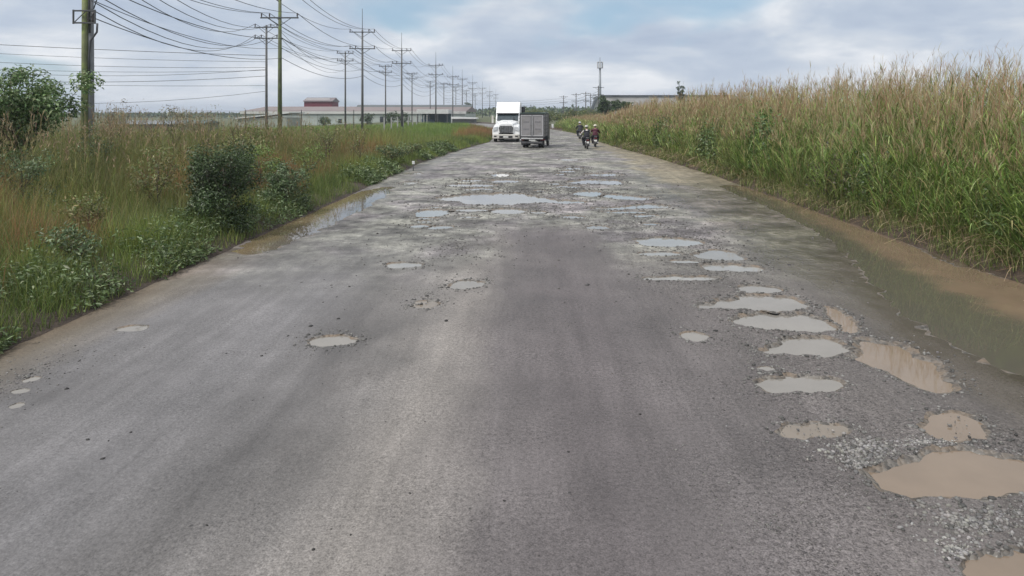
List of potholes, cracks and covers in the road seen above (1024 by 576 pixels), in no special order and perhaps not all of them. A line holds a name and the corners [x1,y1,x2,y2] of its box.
pothole [845,336,962,394]
pothole [728,310,842,332]
pothole [773,421,853,440]
pothole [307,334,360,347]
pothole [447,279,486,289]
pothole [114,324,150,332]
pothole [632,236,706,247]
pothole [412,208,456,217]
pothole [858,444,1024,502]
pothole [751,372,848,393]
pothole [916,410,992,444]
pothole [435,192,589,205]
